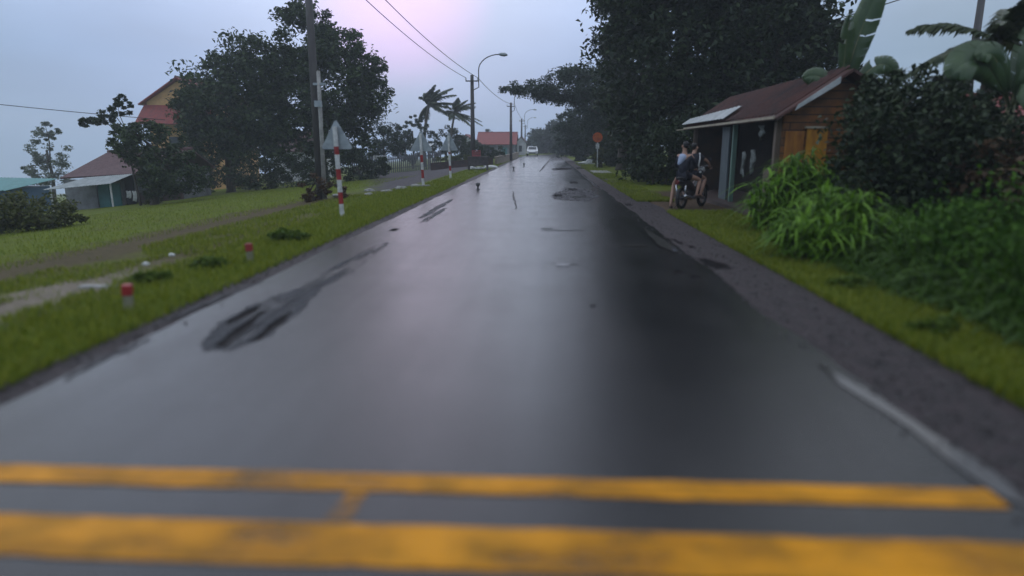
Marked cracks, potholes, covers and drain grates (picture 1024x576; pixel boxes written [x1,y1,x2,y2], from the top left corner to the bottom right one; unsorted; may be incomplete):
pothole [253,314,291,341]
pothole [216,311,266,347]
pothole [226,307,260,325]
